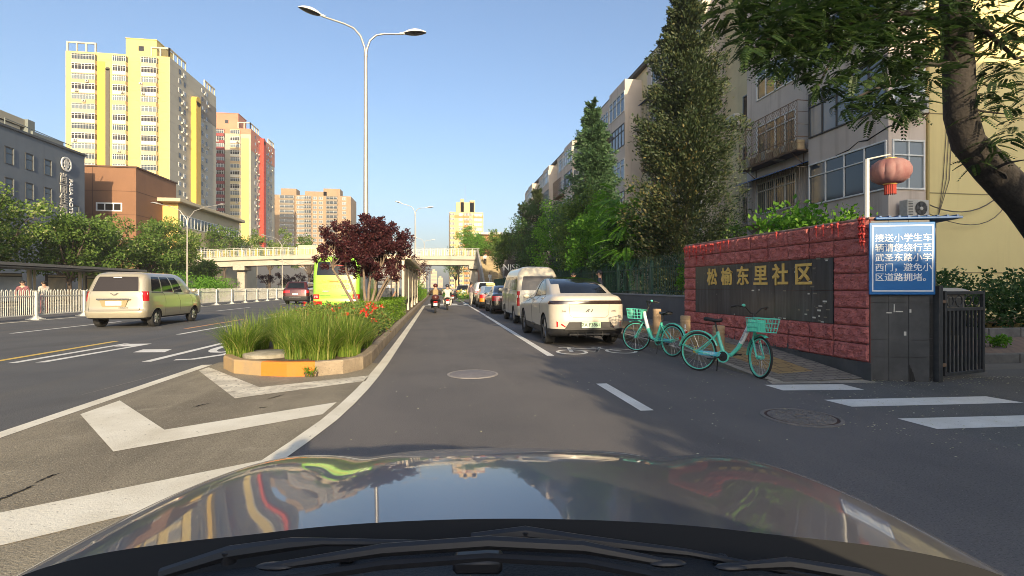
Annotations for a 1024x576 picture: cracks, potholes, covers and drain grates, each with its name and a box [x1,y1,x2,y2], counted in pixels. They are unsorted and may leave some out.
manhole cover [760,408,845,428]
crack [0,473,59,499]
manhole cover [447,370,498,379]
